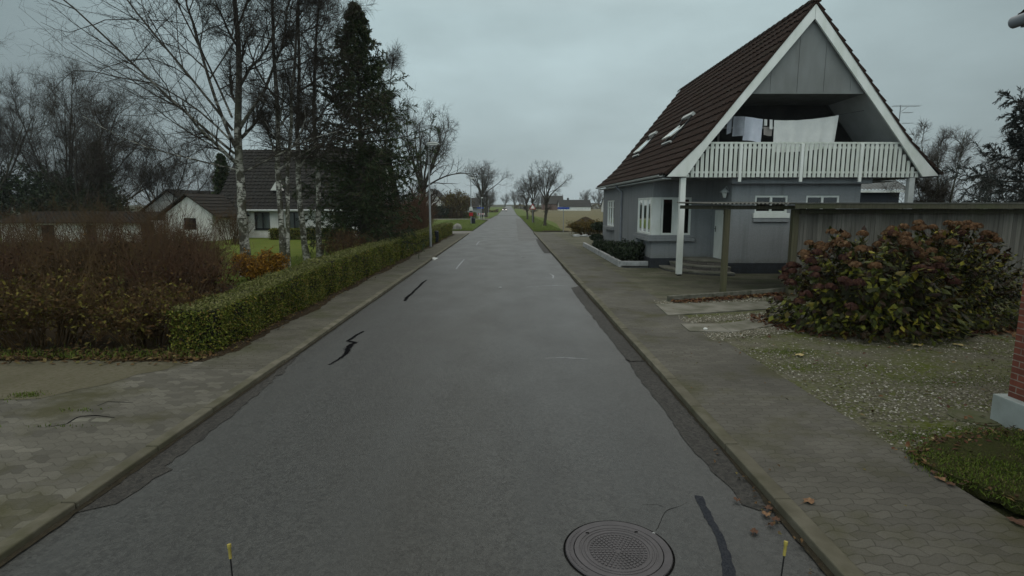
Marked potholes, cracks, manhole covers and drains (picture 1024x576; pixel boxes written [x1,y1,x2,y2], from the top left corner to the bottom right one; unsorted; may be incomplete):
crack [51,401,133,427]
manhole cover [563,521,675,576]
